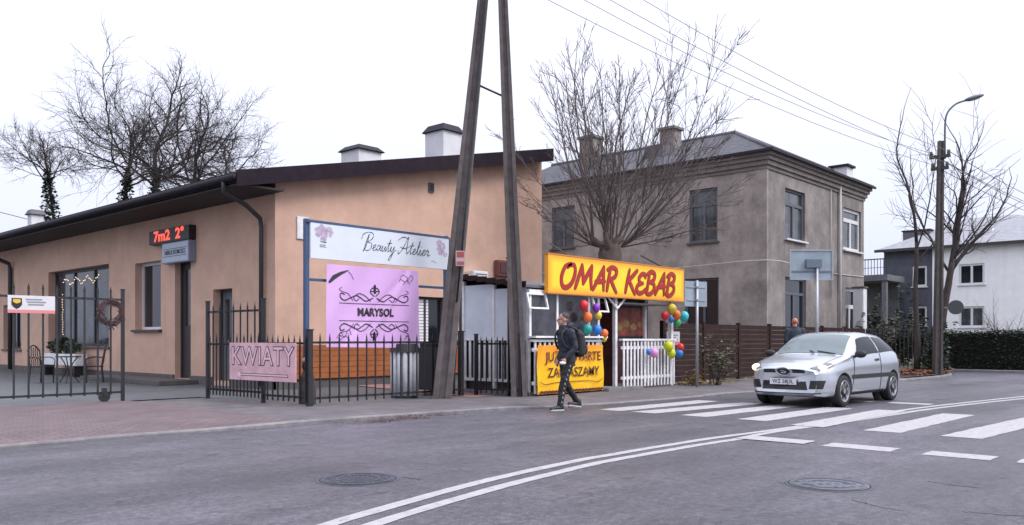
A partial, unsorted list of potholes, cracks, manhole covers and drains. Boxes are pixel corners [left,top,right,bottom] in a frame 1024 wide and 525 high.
manhole cover [316,472,400,487]
manhole cover [784,477,875,492]
